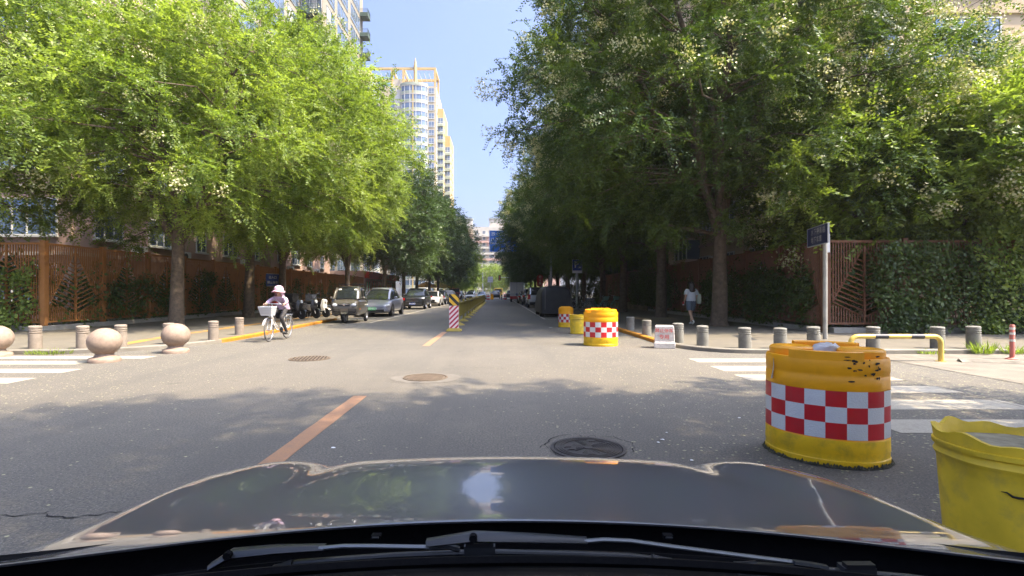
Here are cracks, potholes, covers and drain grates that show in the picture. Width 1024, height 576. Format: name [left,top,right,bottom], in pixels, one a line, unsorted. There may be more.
manhole cover [390,373,461,383]
manhole cover [551,437,627,458]
